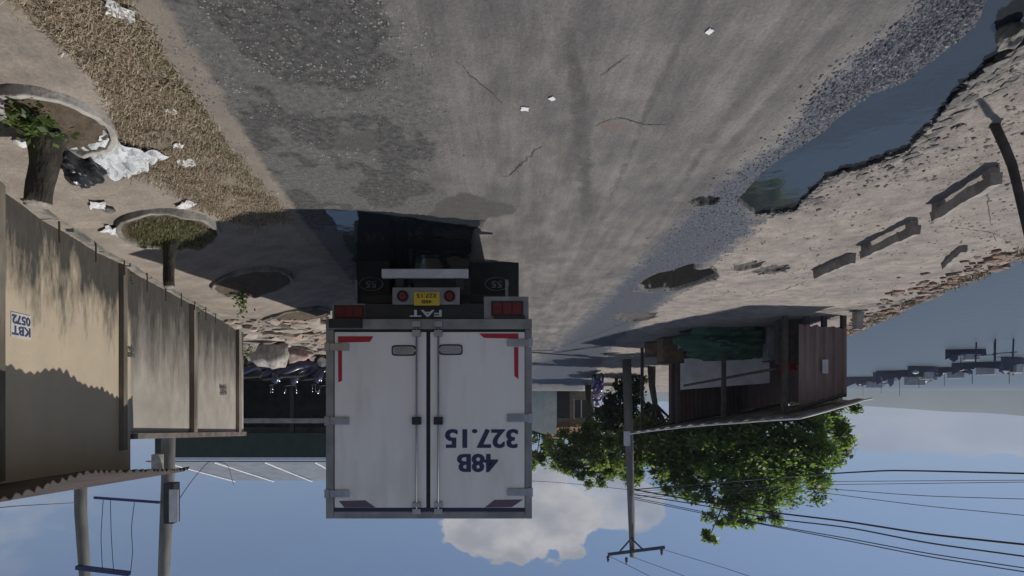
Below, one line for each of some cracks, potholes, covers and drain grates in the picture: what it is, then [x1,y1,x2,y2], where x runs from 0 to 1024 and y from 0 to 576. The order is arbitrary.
pothole [688,196,721,207]
pothole [630,263,720,296]
pothole [749,264,790,275]
pothole [737,0,1024,218]
pothole [731,260,766,273]
